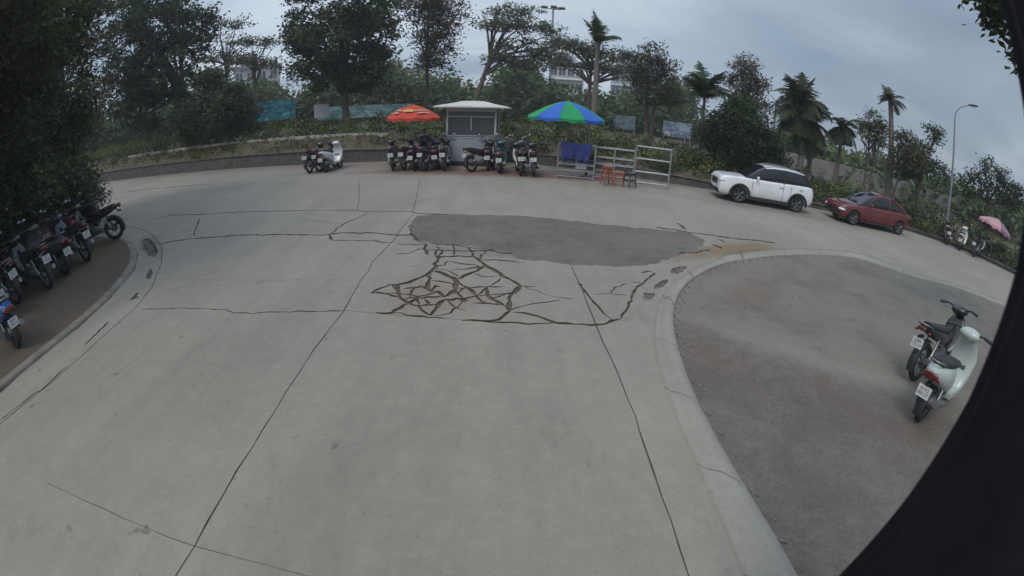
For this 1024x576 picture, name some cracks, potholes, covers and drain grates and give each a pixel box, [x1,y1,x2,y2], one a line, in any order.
pothole [141,238,158,257]
crack [0,369,63,421]
crack [160,214,628,326]
